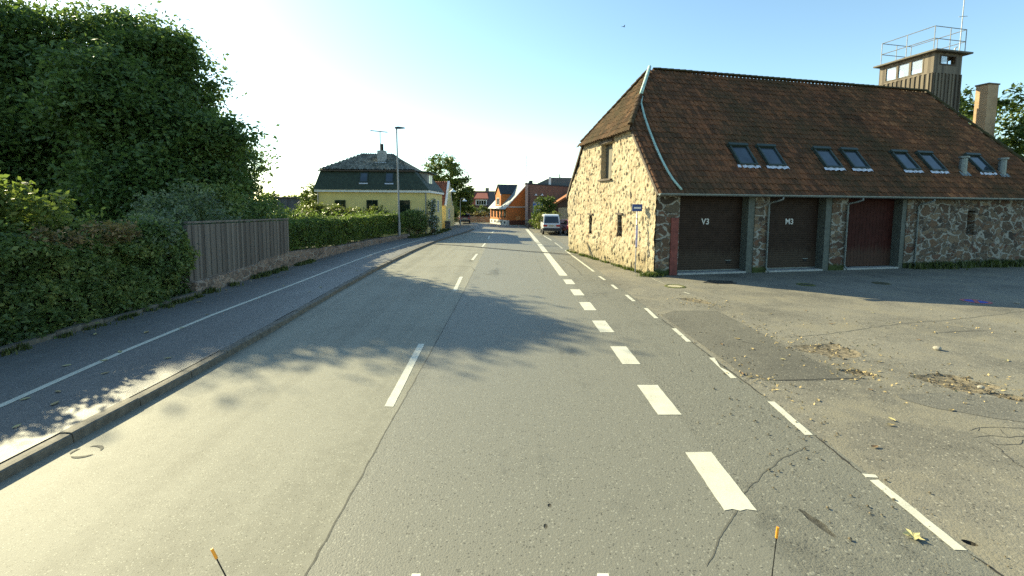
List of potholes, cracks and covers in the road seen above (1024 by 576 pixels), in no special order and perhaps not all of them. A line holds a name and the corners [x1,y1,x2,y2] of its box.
crack [969,427,1023,466]
crack [706,446,806,566]
pothole [980,390,1024,401]
pothole [788,342,864,360]
pothole [899,371,1002,394]
pothole [838,369,884,378]
